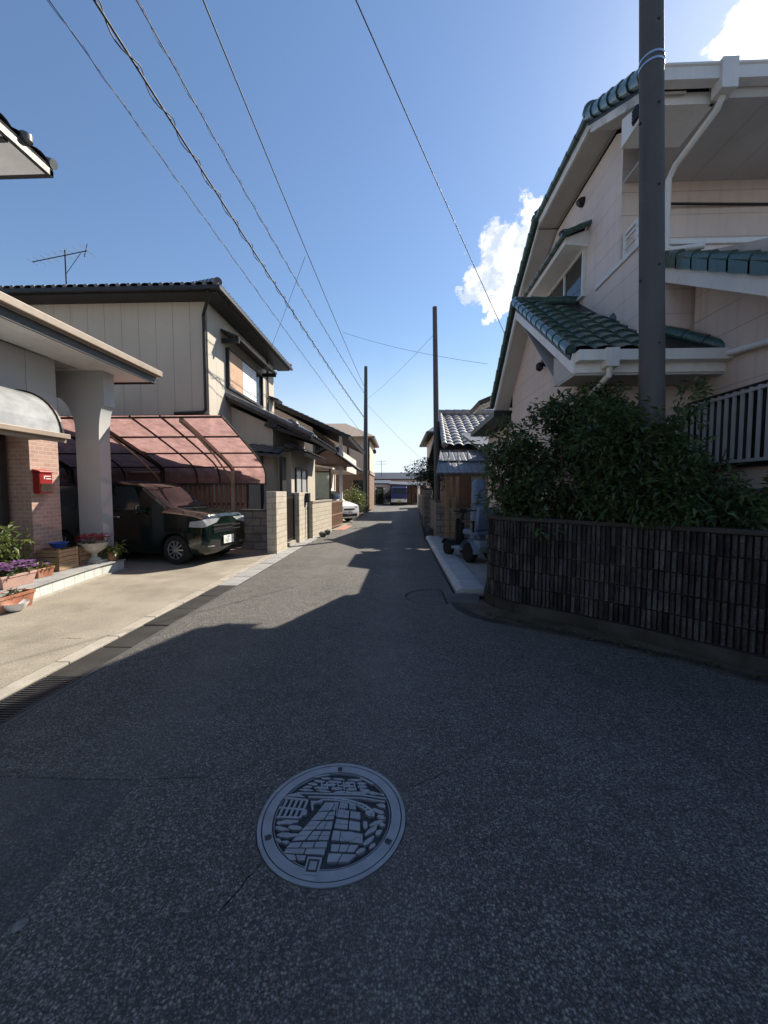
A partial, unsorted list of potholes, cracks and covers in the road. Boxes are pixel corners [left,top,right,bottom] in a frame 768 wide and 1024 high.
manhole cover [257,763,405,890]
crack [214,863,262,917]
drain grate [0,677,79,723]
